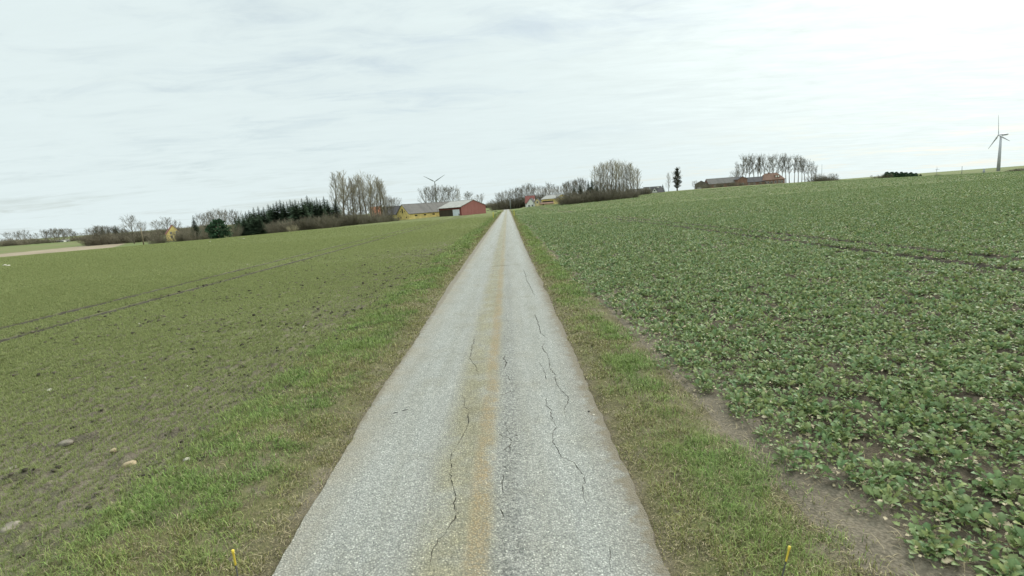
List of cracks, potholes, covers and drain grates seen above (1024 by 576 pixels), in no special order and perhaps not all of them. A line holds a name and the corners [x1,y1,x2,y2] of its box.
crack [426,395,470,576]
crack [499,356,519,516]
crack [535,316,586,504]
